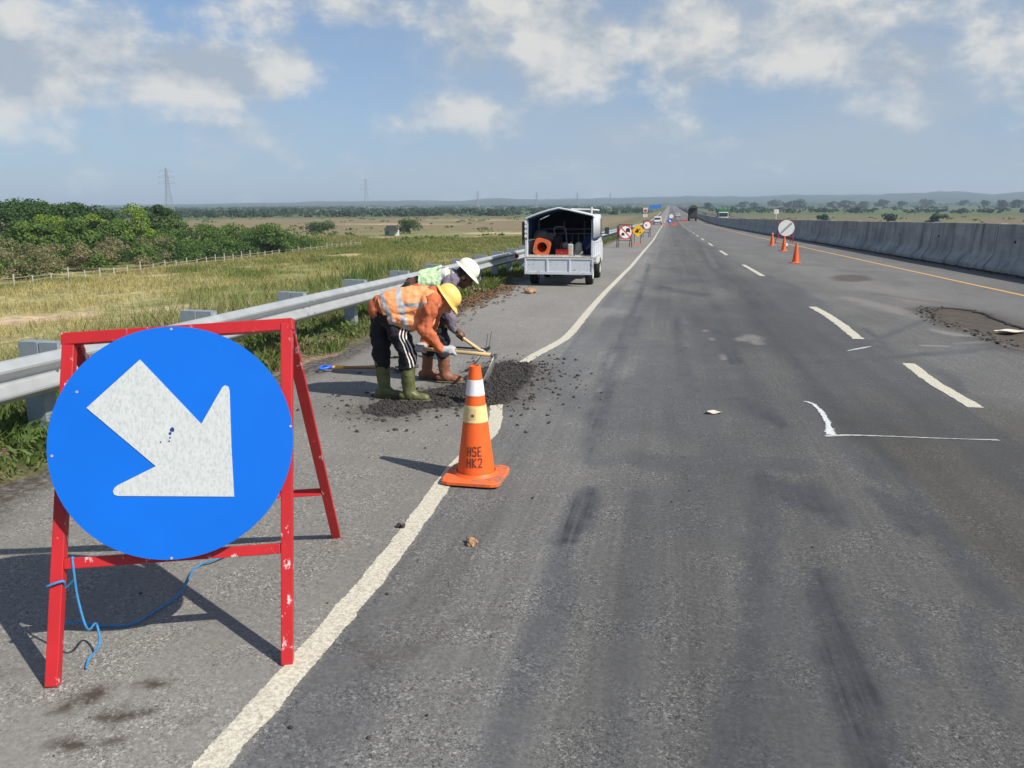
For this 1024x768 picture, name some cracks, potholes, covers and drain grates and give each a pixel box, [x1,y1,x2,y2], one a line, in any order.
pothole [913,306,1024,351]
